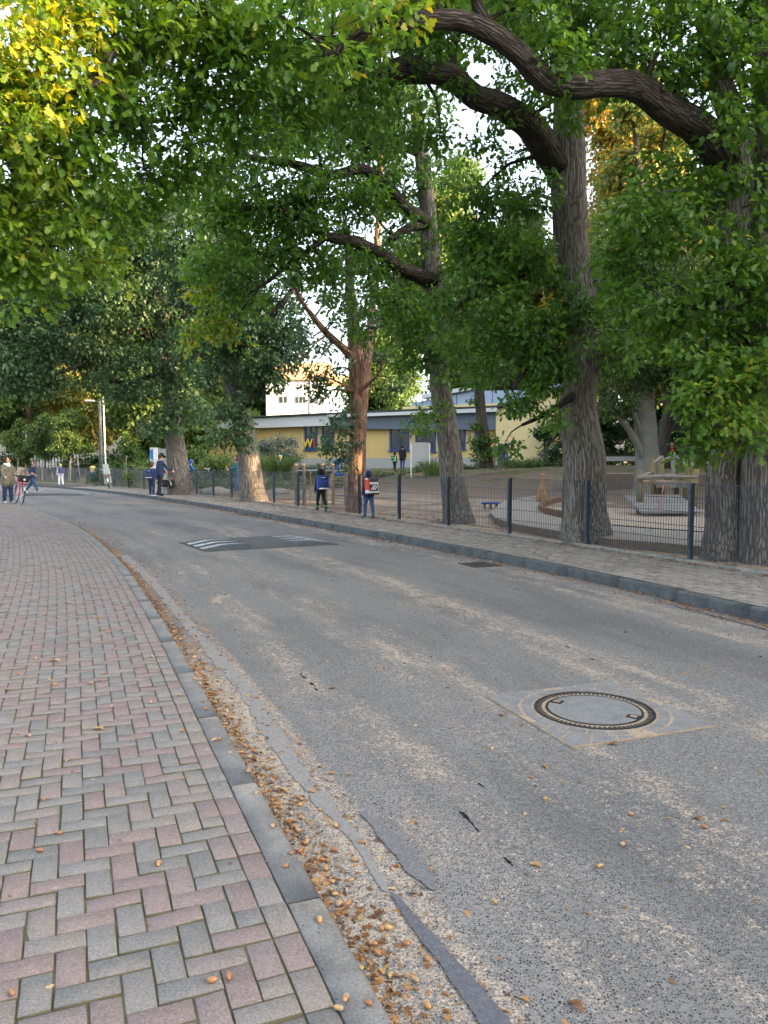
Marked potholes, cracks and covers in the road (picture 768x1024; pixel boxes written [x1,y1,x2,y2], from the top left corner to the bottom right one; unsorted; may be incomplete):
crack [459,811,479,832]
manhole cover [486,681,716,749]
